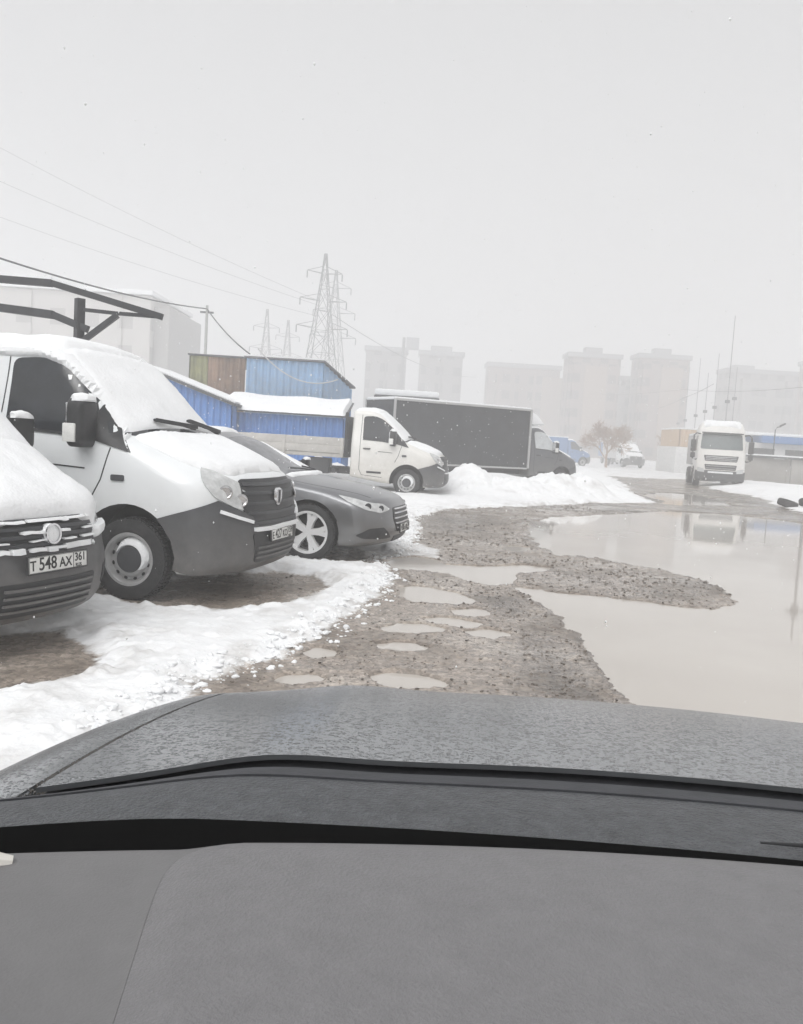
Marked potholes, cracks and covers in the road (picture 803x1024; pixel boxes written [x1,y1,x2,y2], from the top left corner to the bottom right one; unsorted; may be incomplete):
pothole [457,626,518,639]
pothole [298,642,344,659]
pothole [367,637,437,653]
pothole [393,583,481,605]
pothole [374,619,453,634]
pothole [415,614,487,631]
pothole [383,555,553,586]
pothole [498,510,803,723]
pothole [445,605,497,617]
pothole [361,667,458,690]
pothole [266,668,332,686]
